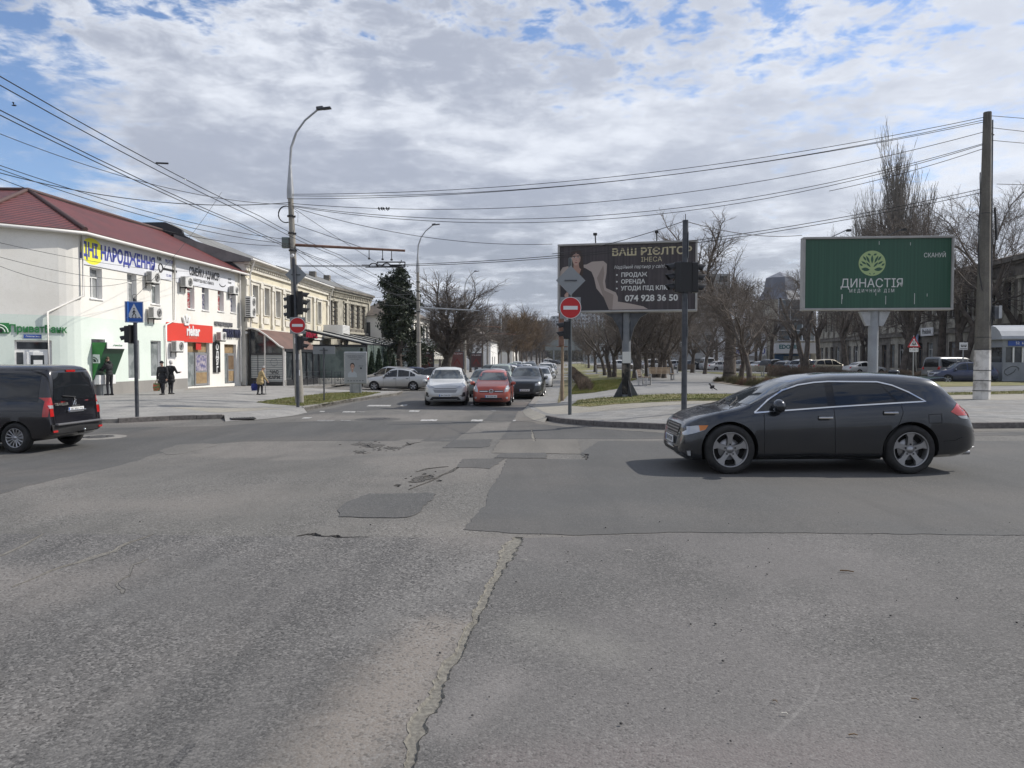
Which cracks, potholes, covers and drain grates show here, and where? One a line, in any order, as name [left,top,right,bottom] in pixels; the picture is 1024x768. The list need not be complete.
crack [403,537,523,768]
pothole [394,471,442,487]
crack [0,533,153,594]
